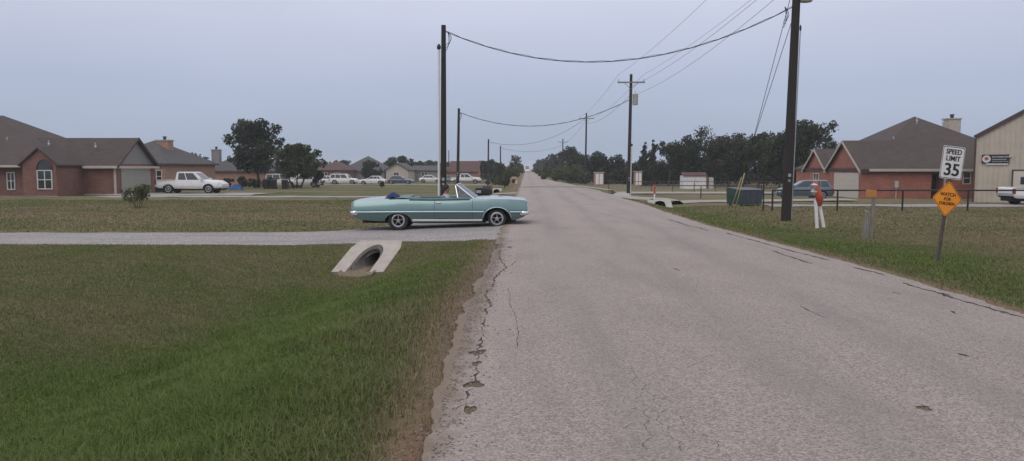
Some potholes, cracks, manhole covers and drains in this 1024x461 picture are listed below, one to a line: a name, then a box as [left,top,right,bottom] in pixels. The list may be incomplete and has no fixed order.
pothole [463,380,485,388]
crack [626,367,719,452]
crack [455,243,519,410]
crack [893,283,1024,318]
crack [727,233,831,264]
